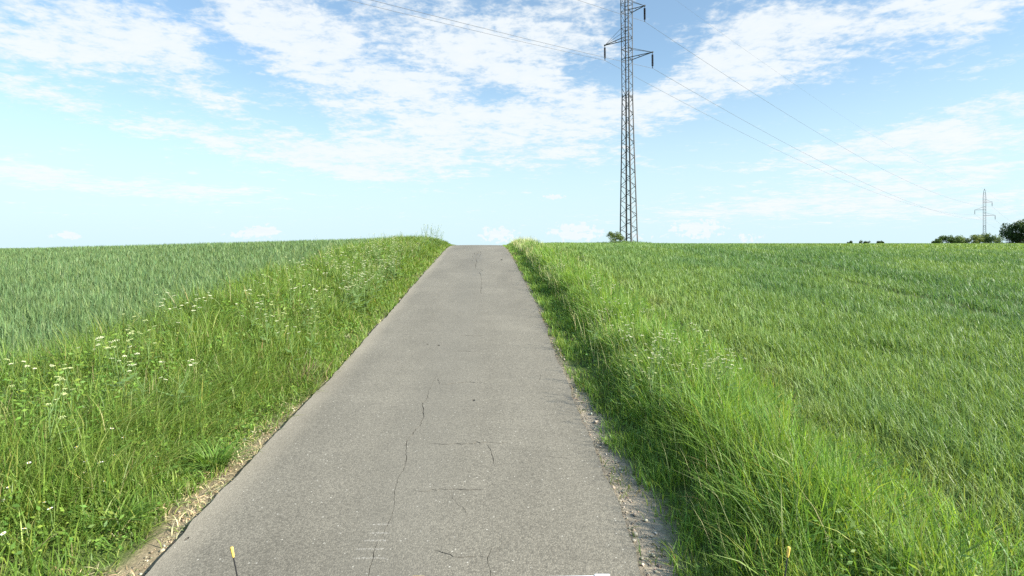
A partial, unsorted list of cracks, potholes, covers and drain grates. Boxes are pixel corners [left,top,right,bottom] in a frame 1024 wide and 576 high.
crack [432,441,508,466]
crack [368,377,475,576]
crack [435,550,491,576]
